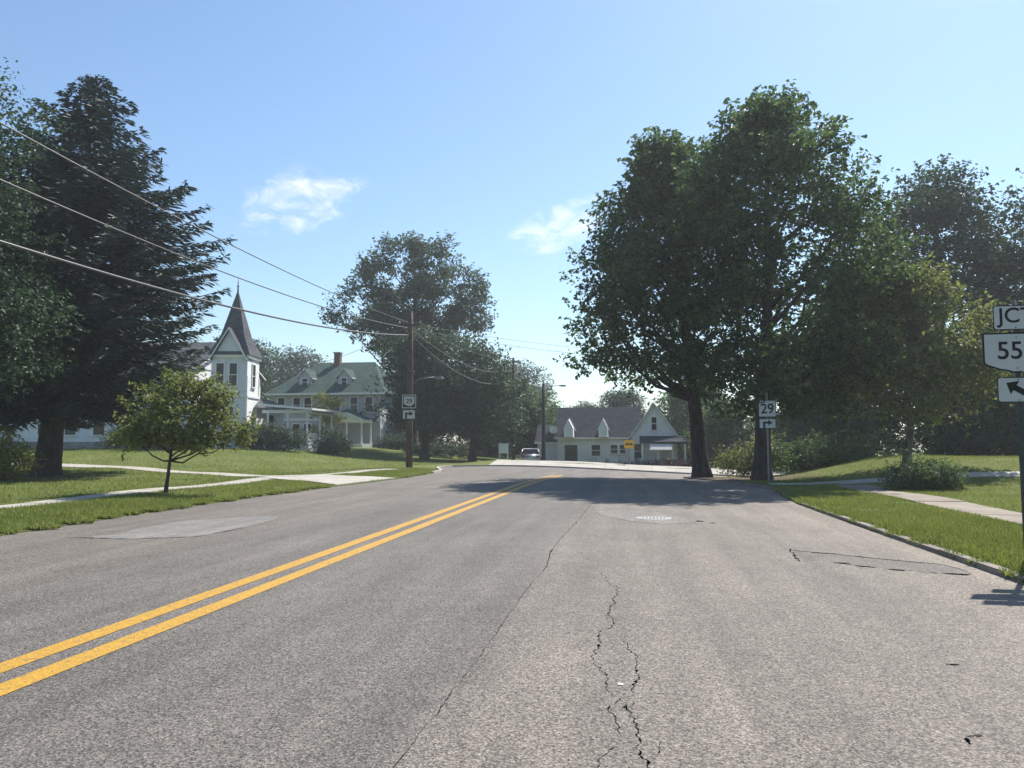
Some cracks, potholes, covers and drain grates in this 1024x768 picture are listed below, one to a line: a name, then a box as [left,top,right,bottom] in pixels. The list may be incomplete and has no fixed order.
crack [393,508,588,768]
crack [591,573,661,768]
